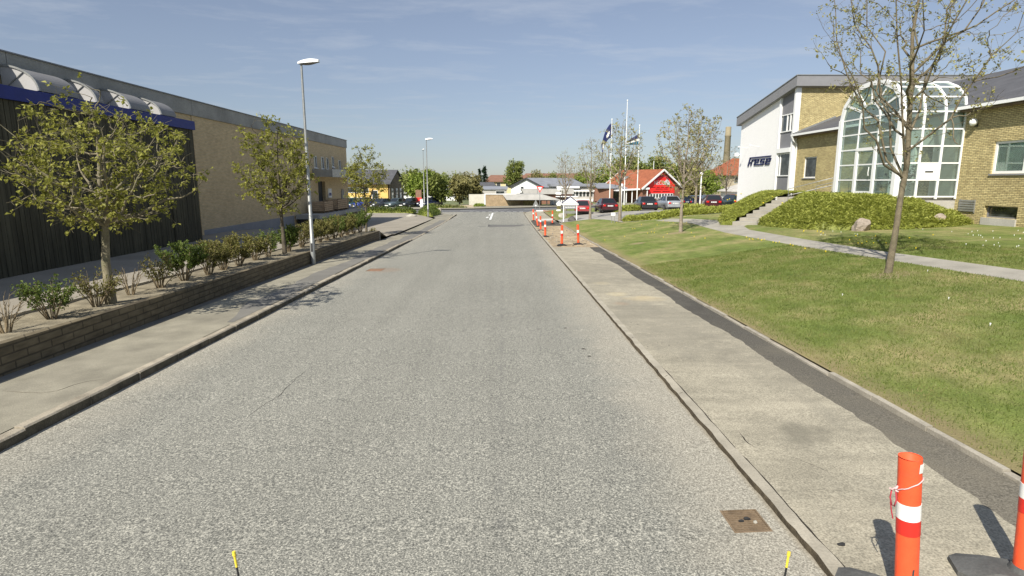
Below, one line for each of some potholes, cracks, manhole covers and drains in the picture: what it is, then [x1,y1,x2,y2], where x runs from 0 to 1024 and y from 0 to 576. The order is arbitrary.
manhole cover [719,509,773,533]
